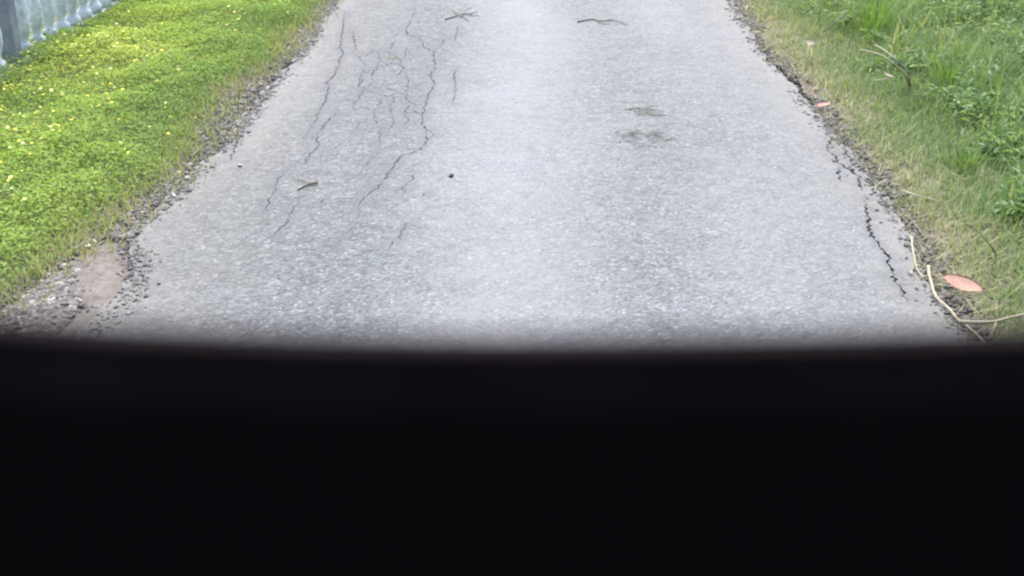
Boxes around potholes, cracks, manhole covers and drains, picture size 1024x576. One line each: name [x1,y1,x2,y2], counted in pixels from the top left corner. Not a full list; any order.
crack [826,137,908,301]
crack [263,173,294,238]
crack [305,5,458,239]
